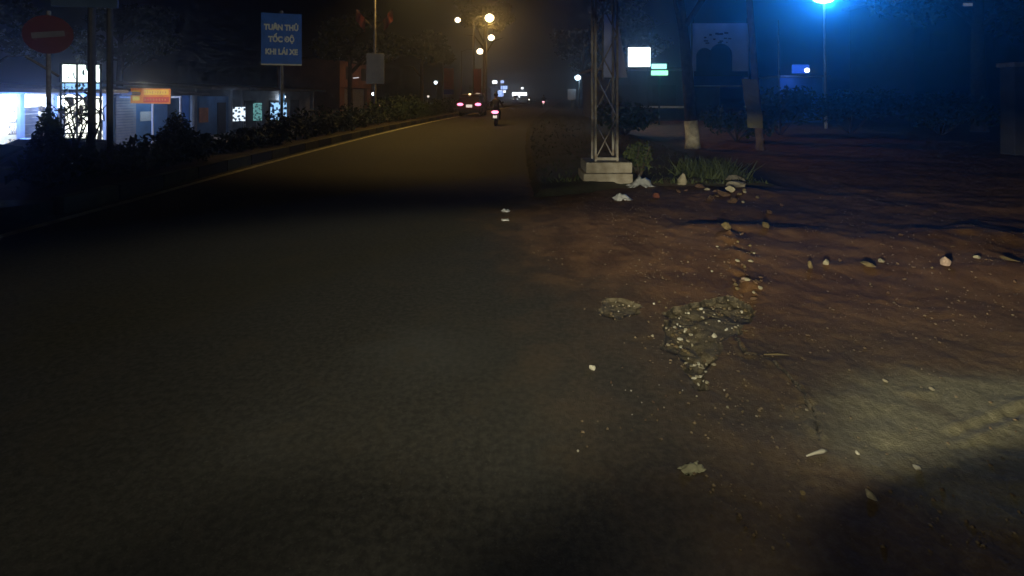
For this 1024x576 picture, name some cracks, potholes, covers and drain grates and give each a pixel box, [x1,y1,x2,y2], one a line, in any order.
pothole [659,295,756,391]
crack [734,337,823,441]
pothole [598,297,643,320]
